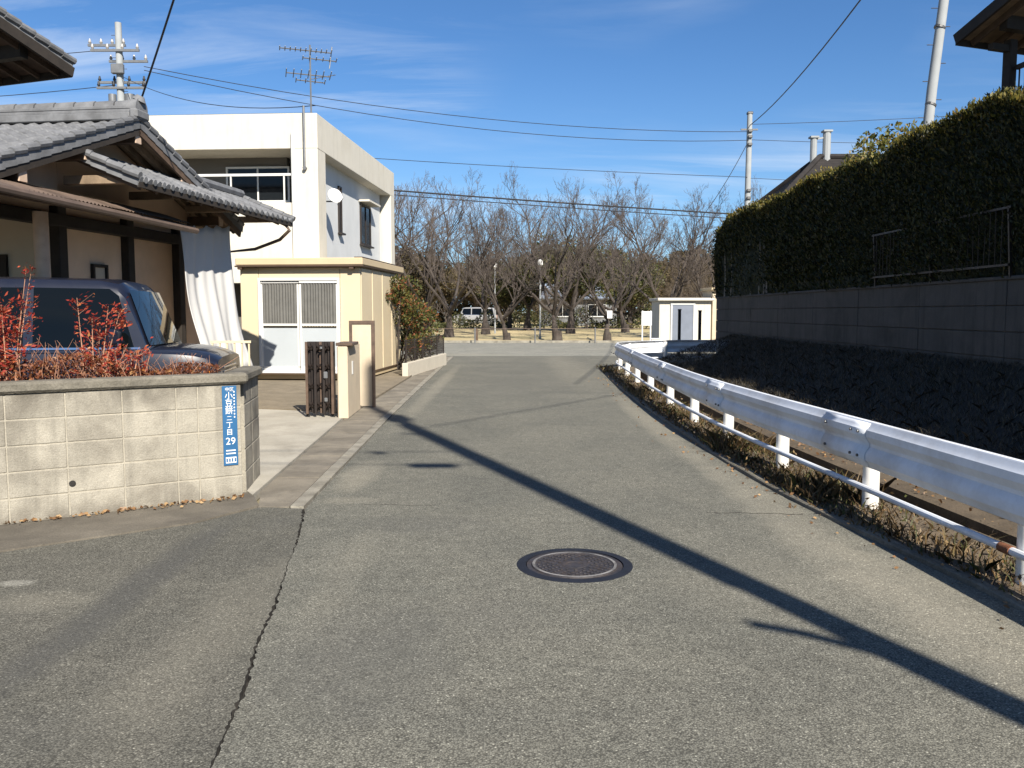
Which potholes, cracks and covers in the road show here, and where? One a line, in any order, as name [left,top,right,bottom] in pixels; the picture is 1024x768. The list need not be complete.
manhole cover [517,548,633,583]
crack [210,509,305,768]
